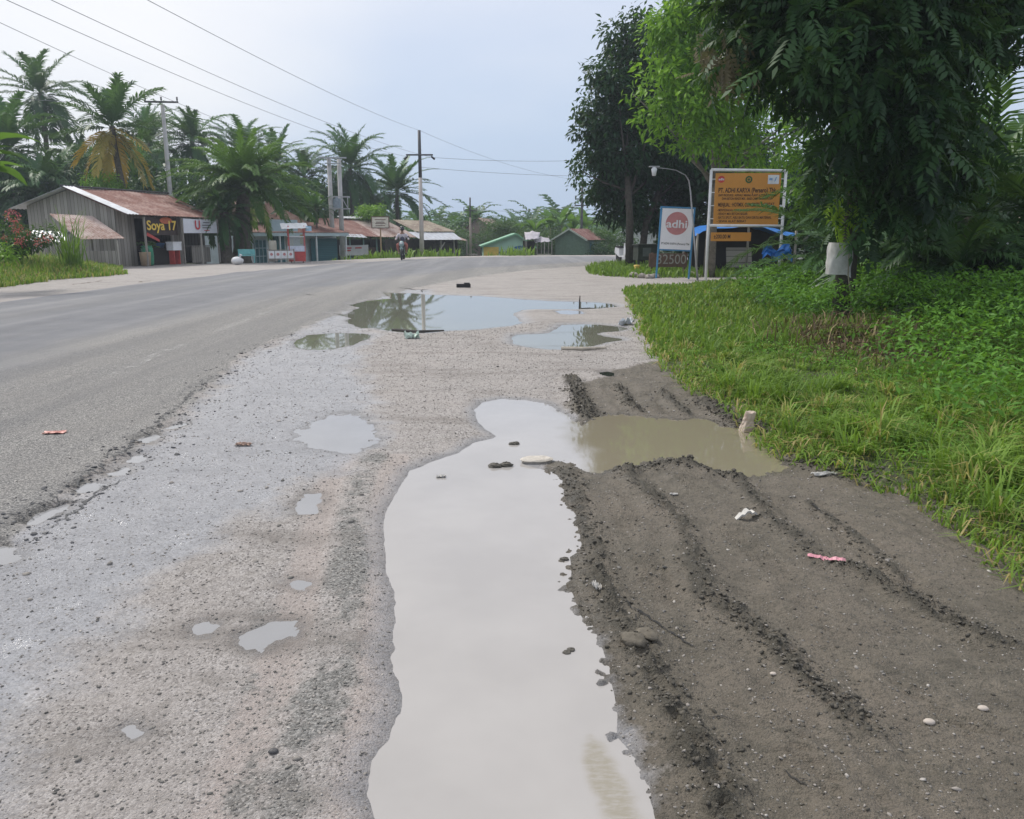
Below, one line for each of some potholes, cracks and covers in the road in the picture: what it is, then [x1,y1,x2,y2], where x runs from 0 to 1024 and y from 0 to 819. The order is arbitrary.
pothole [329,395,812,819]
pothole [287,491,330,516]
pothole [229,617,308,658]
pothole [184,618,229,641]
pothole [331,291,622,333]
pothole [281,408,393,457]
pothole [287,331,380,350]
pothole [505,322,632,350]
